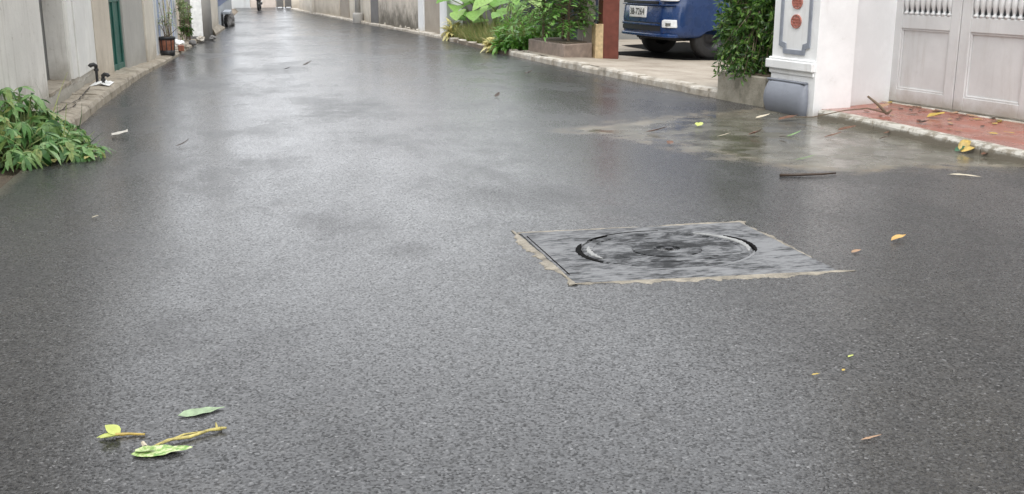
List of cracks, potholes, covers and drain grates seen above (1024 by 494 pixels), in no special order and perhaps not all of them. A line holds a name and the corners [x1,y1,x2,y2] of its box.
manhole cover [511,221,856,286]
